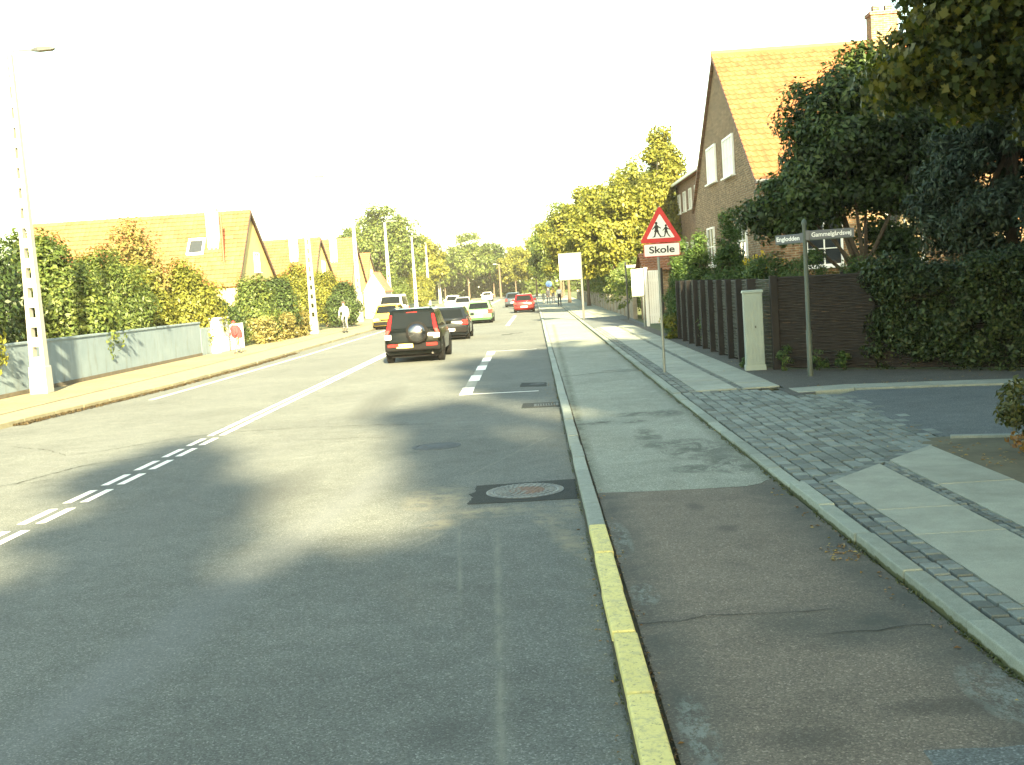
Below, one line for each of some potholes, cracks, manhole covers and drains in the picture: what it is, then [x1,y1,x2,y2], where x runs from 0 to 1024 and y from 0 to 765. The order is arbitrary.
crack [637,608,833,624]
manhole cover [412,442,461,450]
crack [828,624,926,634]
manhole cover [486,483,564,498]
